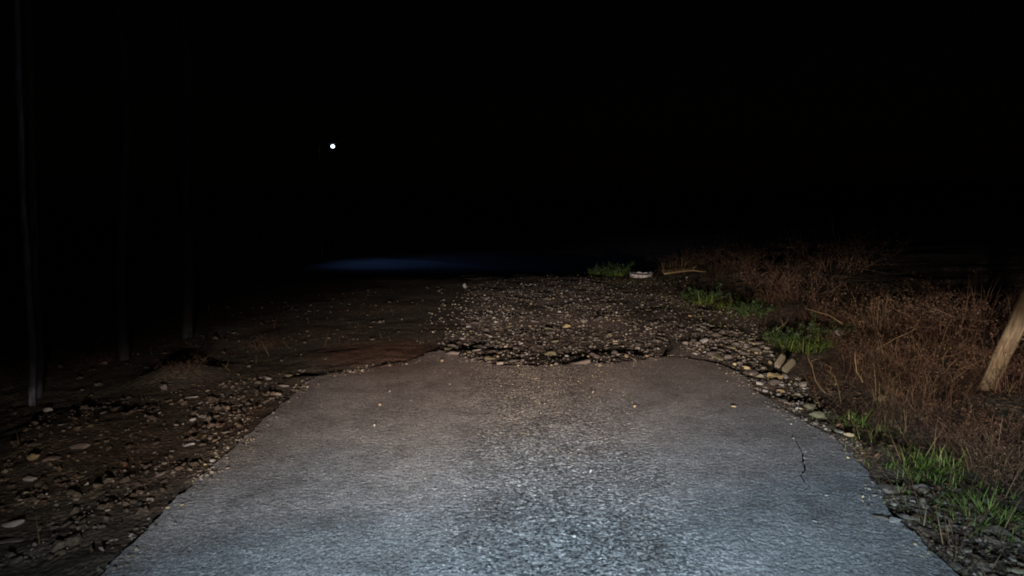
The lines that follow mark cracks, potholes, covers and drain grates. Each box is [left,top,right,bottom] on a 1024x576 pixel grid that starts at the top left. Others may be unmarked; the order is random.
crack [791,433,808,490]
pothole [436,314,670,366]
